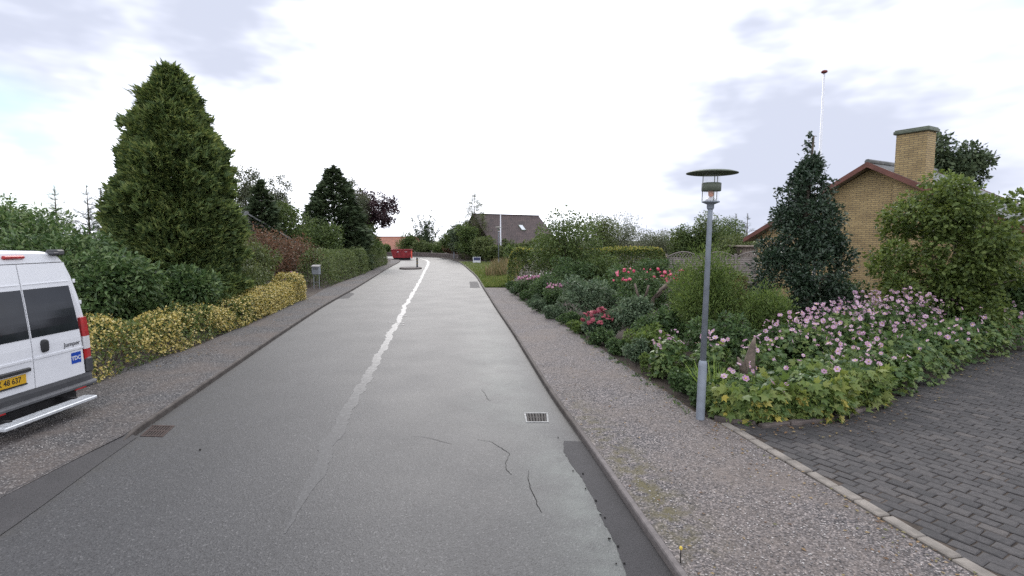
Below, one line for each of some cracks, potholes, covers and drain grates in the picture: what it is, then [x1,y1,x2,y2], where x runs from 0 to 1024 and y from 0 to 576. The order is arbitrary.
drain grate [524,412,549,423]
drain grate [140,425,175,437]
